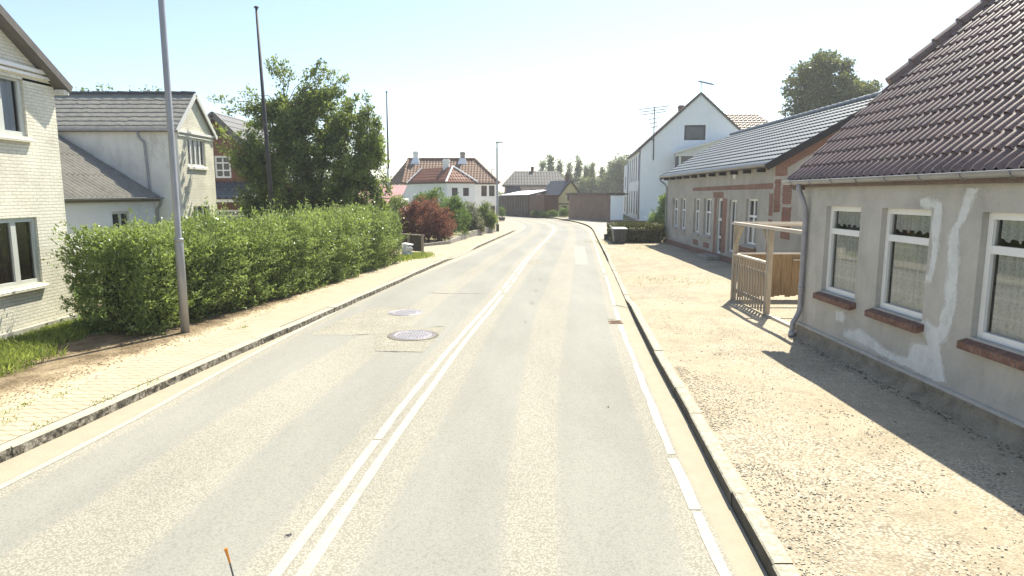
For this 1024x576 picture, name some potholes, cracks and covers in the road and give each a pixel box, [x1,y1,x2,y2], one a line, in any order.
manhole cover [387,330,439,341]
